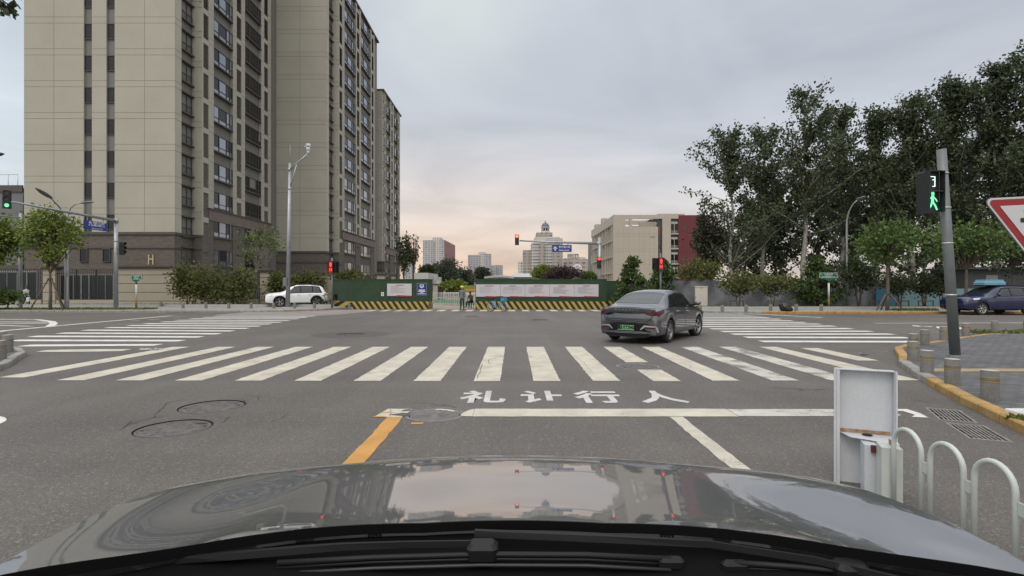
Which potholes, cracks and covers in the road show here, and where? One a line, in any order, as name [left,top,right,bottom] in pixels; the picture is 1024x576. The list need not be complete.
drain grate [945,422,1012,442]
manhole cover [405,407,464,422]
manhole cover [177,400,246,414]
drain grate [925,407,978,423]
manhole cover [131,419,214,438]
